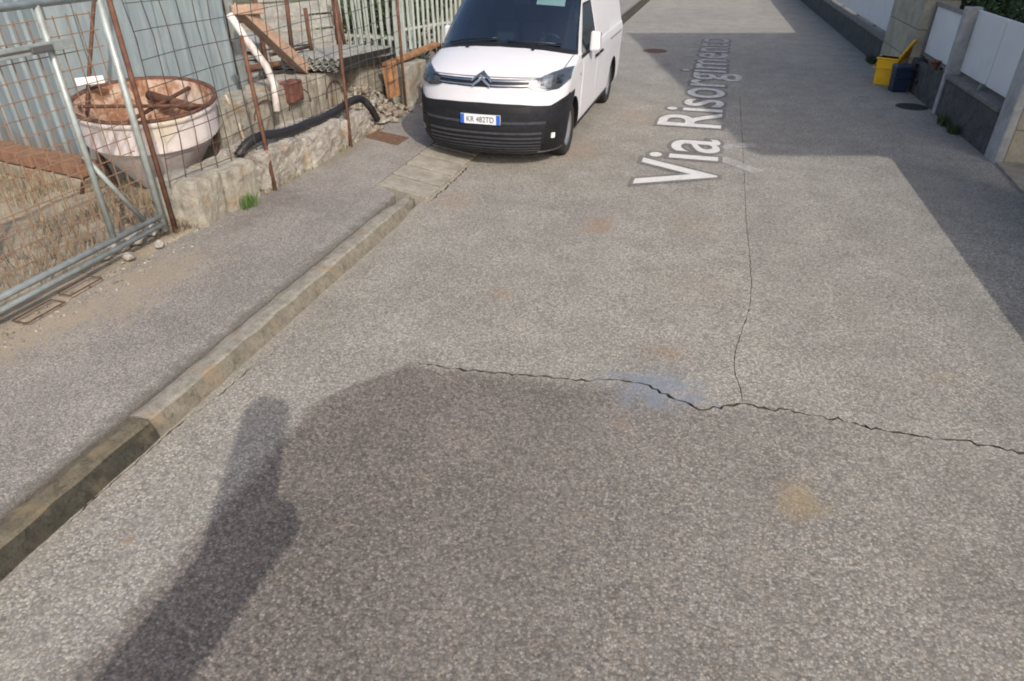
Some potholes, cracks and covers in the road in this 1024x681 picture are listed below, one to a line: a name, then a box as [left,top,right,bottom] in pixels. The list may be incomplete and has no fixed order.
manhole cover [364,131,409,145]
crack [417,97,1024,455]
